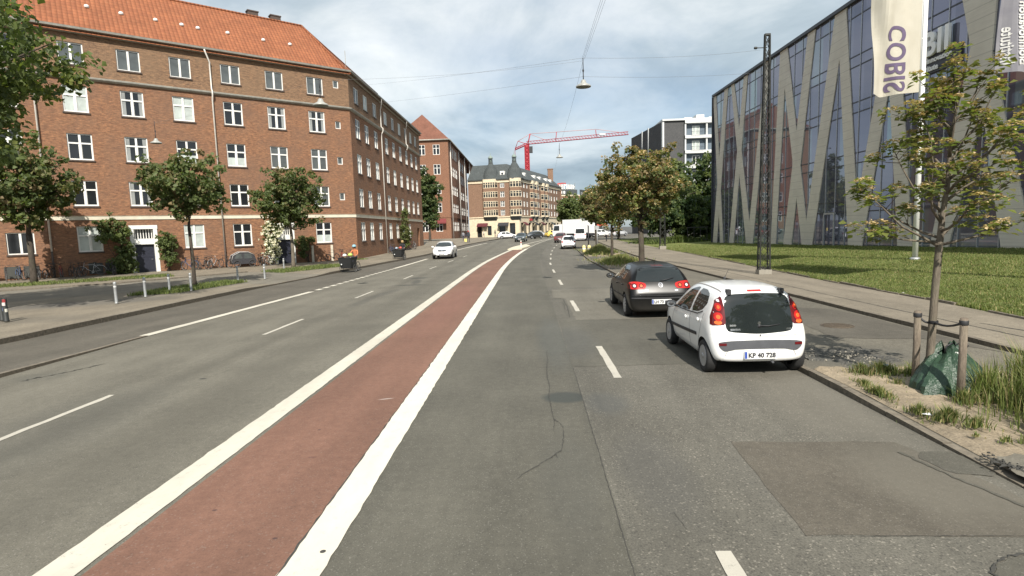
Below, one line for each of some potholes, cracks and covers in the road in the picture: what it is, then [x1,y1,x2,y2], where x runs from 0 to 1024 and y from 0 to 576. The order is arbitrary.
crack [517,352,564,479]
